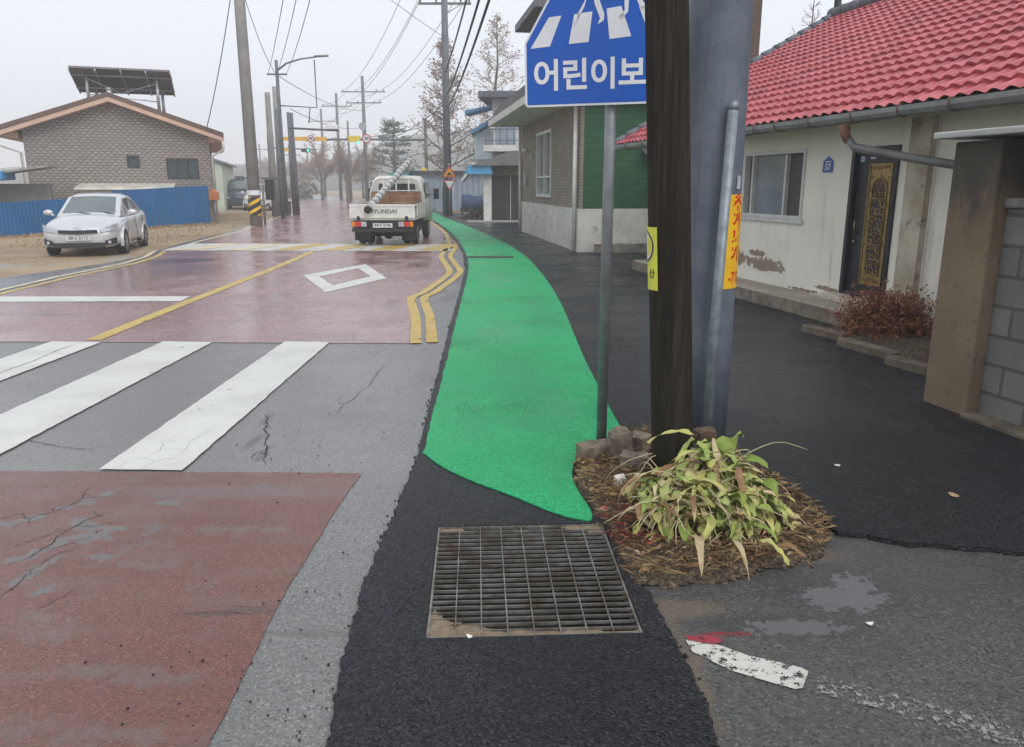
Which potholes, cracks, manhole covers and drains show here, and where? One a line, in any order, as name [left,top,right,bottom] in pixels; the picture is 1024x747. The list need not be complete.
drain grate [426,524,643,638]
crack [0,486,127,596]
